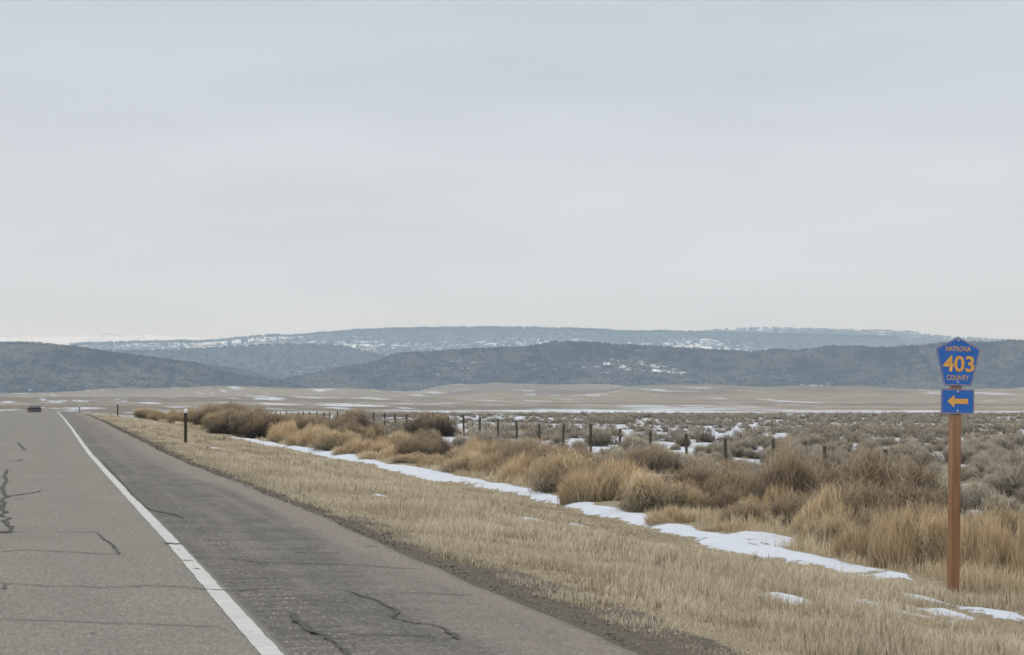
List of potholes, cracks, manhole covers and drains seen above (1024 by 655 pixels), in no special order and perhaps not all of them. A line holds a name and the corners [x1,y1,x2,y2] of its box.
crack [0,442,41,533]
crack [1,533,123,555]
crack [283,589,459,655]
